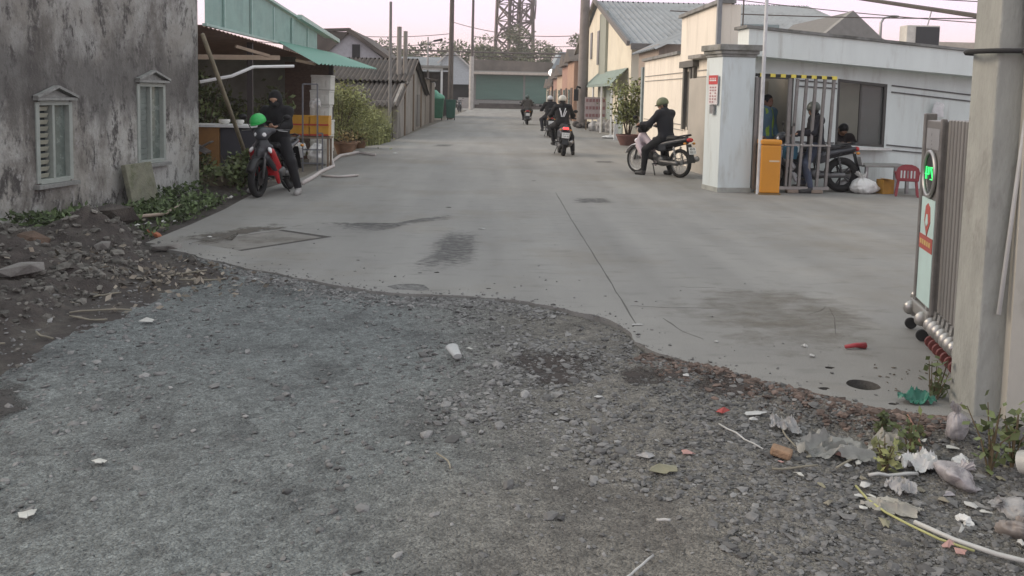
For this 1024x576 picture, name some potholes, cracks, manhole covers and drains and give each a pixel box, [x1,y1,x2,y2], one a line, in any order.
manhole cover [192,230,328,251]
crack [556,194,702,339]
